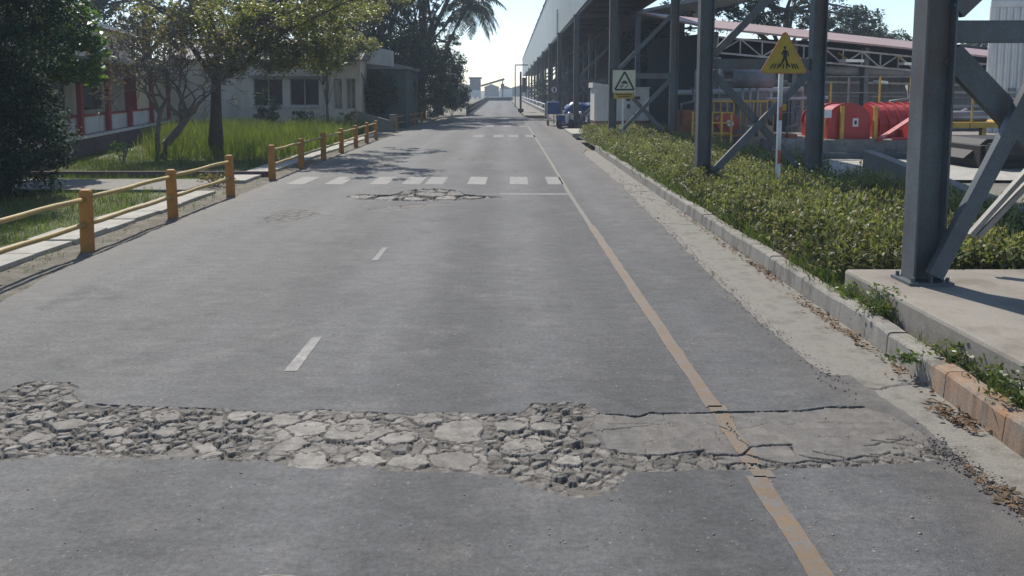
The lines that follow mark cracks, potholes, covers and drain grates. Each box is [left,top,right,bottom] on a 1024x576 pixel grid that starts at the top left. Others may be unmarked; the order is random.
crack [262,209,323,224]
crack [591,382,951,473]
pothole [480,401,630,498]
pothole [346,188,501,201]
pothole [0,380,277,463]
